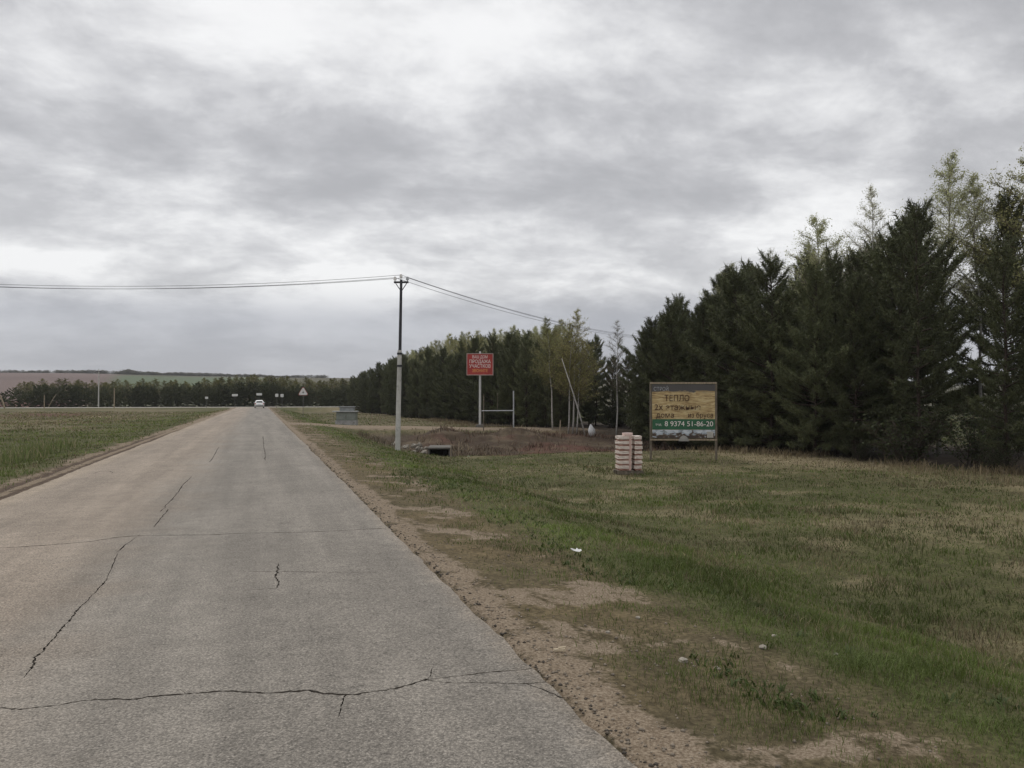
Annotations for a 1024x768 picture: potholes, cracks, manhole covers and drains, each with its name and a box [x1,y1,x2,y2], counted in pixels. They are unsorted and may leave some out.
crack [7,449,382,677]
crack [0,664,562,717]
